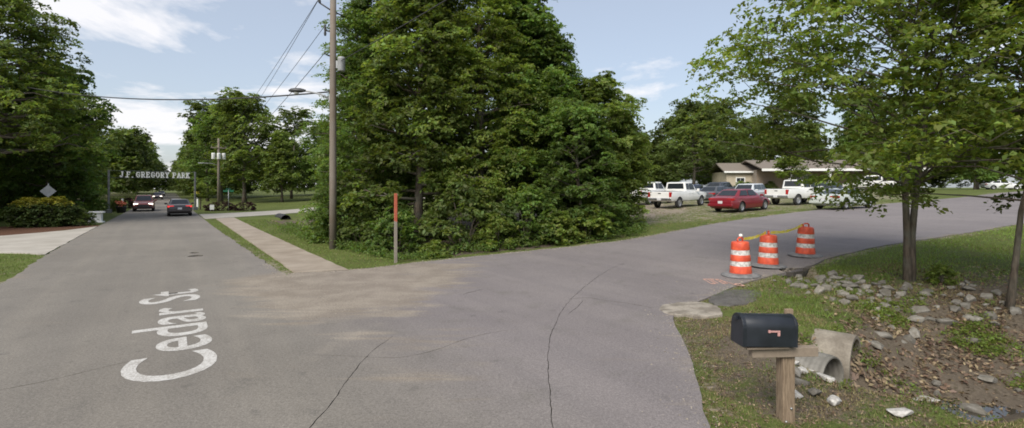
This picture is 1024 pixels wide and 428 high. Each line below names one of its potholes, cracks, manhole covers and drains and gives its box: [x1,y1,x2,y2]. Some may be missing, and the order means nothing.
crack [309,333,488,428]
crack [547,270,652,427]
